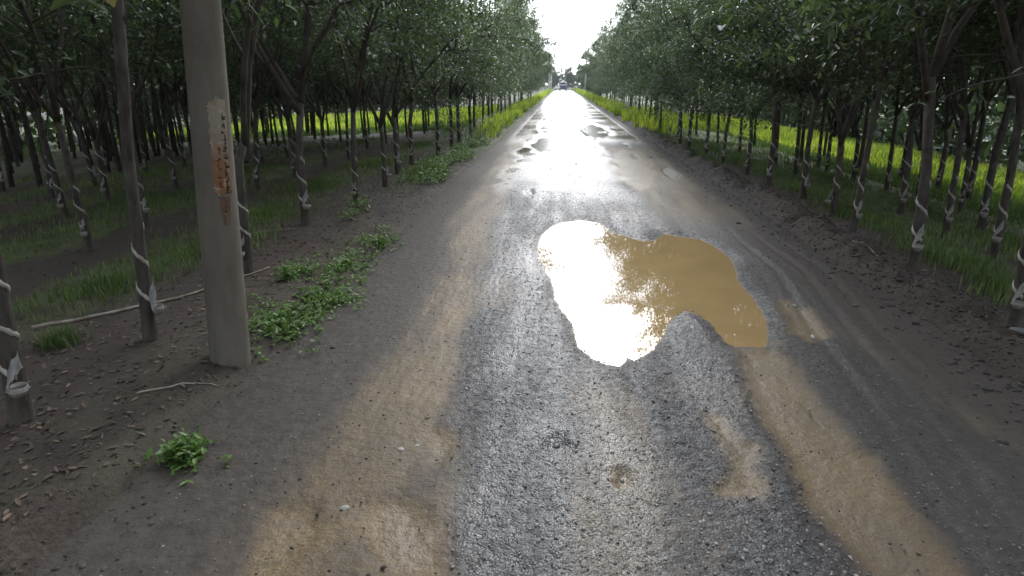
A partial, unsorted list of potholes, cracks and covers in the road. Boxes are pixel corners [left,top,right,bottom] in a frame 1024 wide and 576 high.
pothole [530,121,577,133]
pothole [517,134,589,154]
pothole [573,123,620,138]
pothole [606,462,642,491]
pothole [541,430,582,456]
pothole [524,213,792,372]
pothole [657,165,683,179]
